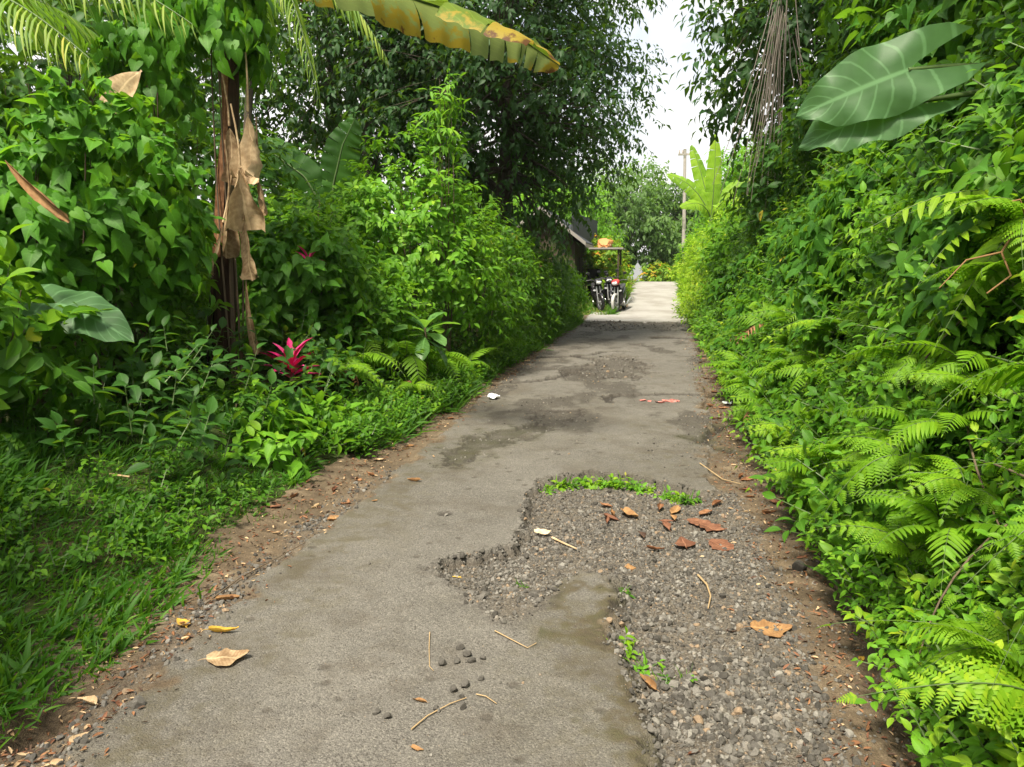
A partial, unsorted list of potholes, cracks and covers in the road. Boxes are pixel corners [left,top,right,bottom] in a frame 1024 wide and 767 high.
pothole [558,355,676,383]
pothole [415,469,879,767]
